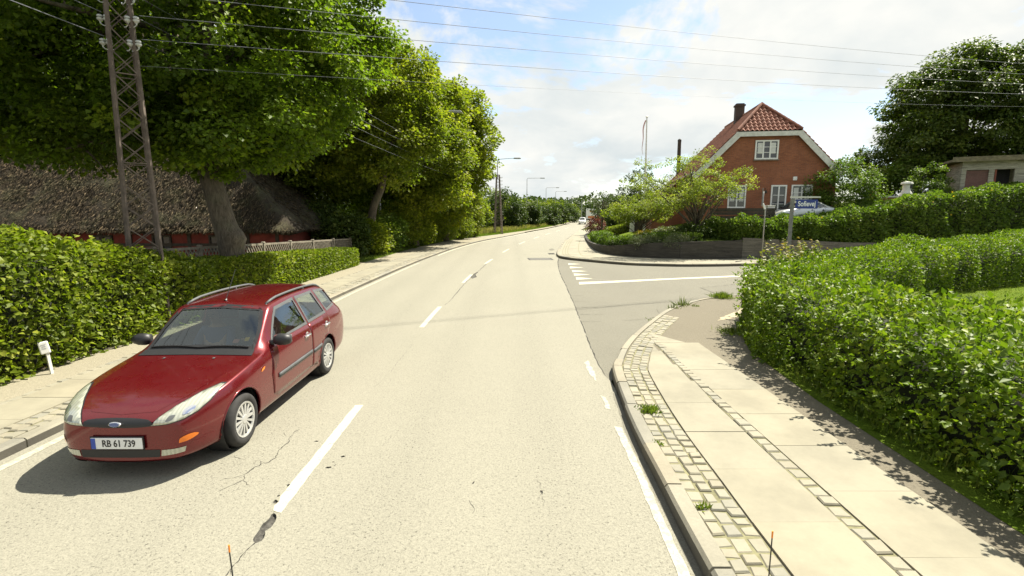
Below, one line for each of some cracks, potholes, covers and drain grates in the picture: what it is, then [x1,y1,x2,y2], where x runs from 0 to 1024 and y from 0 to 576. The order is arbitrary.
pothole [253,513,277,543]
crack [225,430,298,488]
